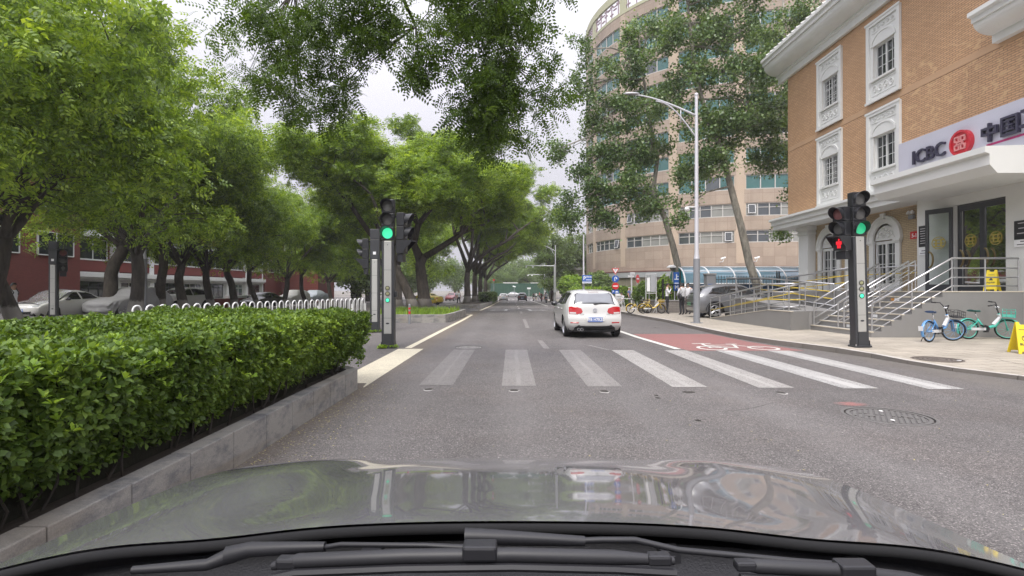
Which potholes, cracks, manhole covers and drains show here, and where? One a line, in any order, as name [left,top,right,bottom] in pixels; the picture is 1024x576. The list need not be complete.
manhole cover [840,407,940,426]
